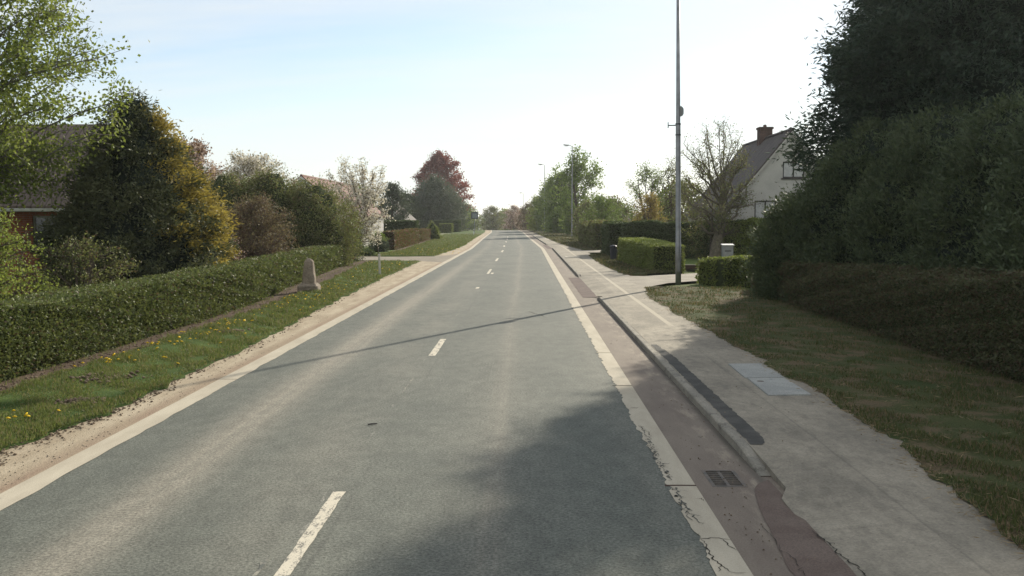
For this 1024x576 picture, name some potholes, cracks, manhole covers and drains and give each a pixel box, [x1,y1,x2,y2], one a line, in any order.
crack [638,425,737,573]
crack [814,532,866,576]
manhole cover [728,363,812,396]
drain grate [701,470,748,487]
